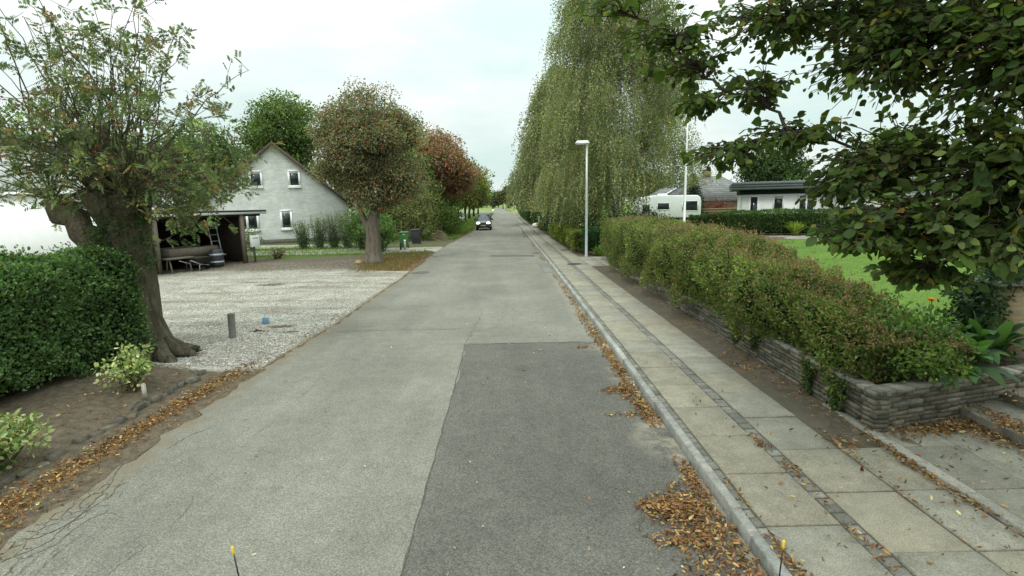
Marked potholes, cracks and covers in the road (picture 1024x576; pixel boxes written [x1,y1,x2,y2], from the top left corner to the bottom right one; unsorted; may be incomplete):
crack [0,442,156,576]
